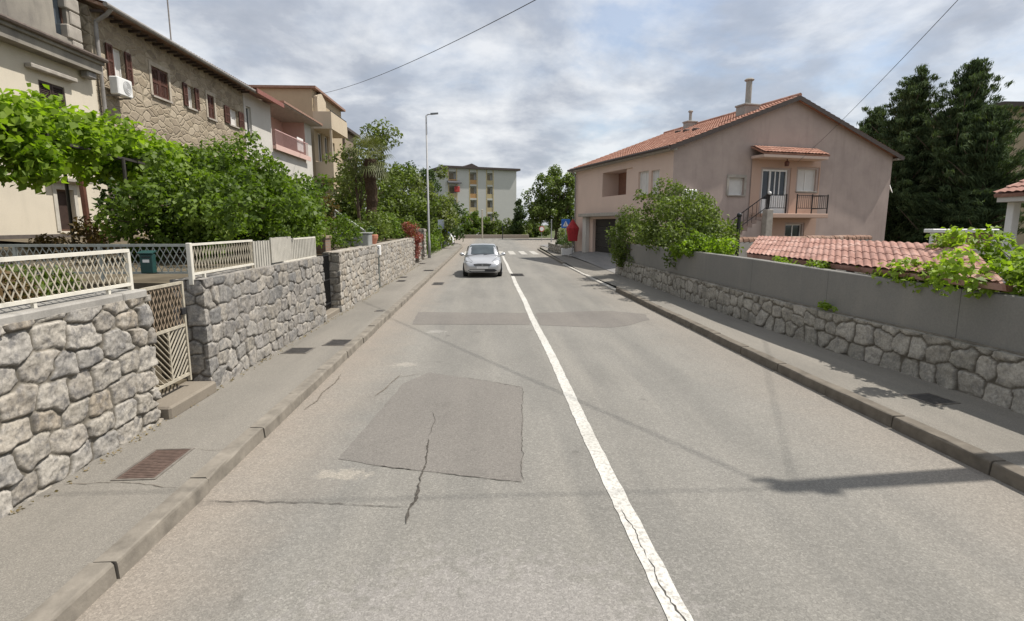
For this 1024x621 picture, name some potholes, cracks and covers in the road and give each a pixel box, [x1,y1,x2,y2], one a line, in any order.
crack [212,378,524,522]
